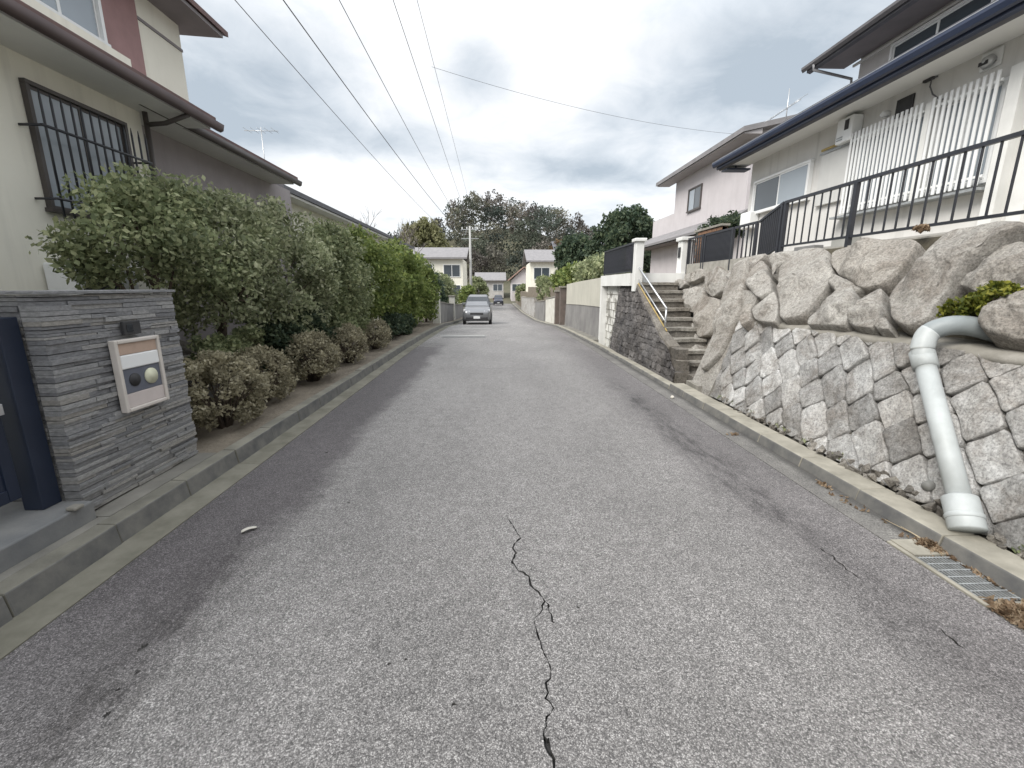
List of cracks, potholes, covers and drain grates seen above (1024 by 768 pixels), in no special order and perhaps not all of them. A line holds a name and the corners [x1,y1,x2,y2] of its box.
drain grate [887,539,1022,609]
crack [506,515,555,768]
